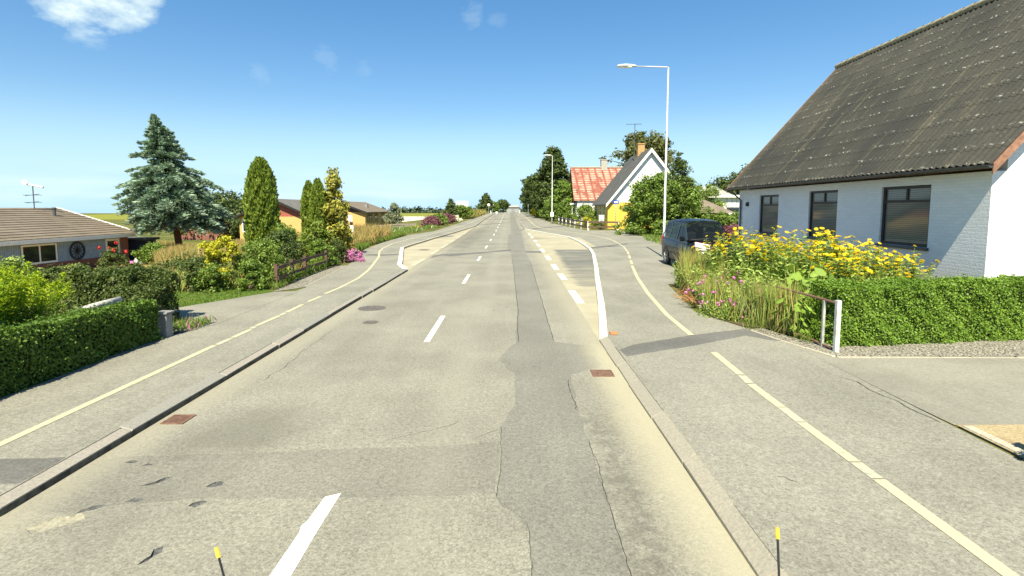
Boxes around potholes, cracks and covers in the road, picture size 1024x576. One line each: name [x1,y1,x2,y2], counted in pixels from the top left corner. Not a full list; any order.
crack [474,428,533,576]
pothole [138,547,163,565]
